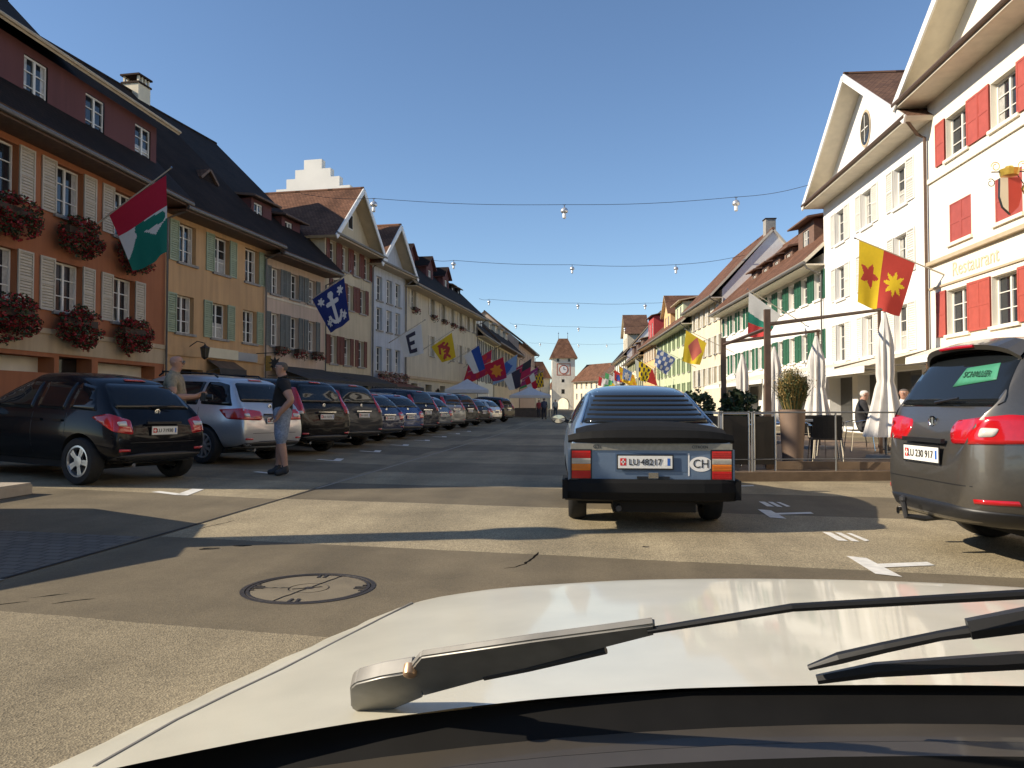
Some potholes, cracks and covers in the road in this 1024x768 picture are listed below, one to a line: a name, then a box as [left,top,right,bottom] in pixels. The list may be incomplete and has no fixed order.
manhole cover [239,573,376,605]
